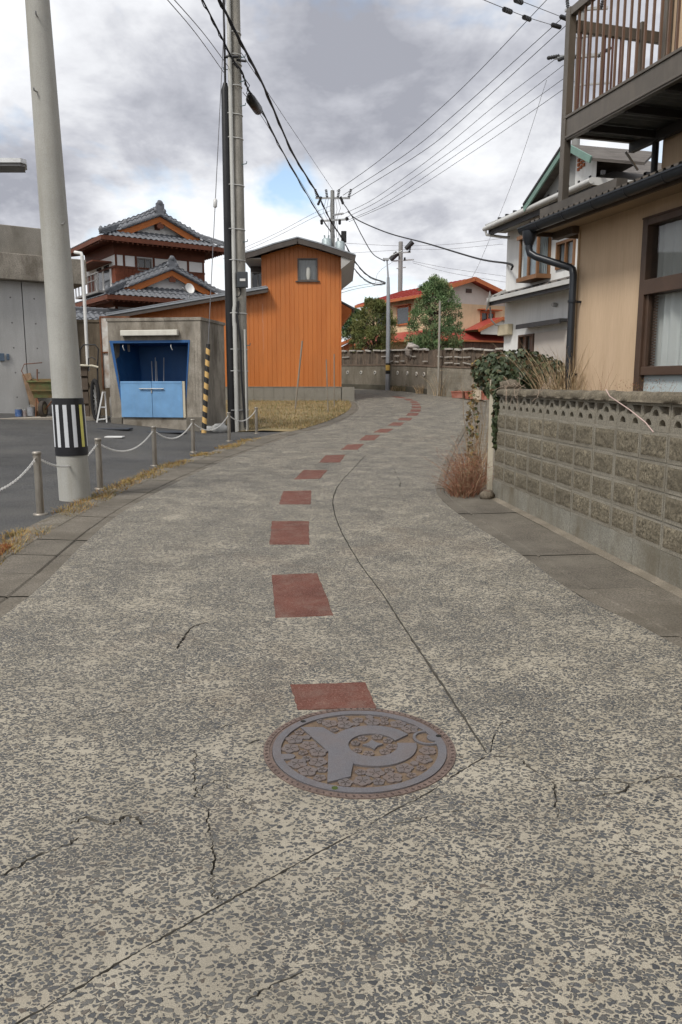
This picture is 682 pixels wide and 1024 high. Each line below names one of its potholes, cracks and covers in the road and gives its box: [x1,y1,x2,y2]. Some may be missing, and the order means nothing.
manhole cover [263,708,456,799]
crack [15,456,682,1024]
